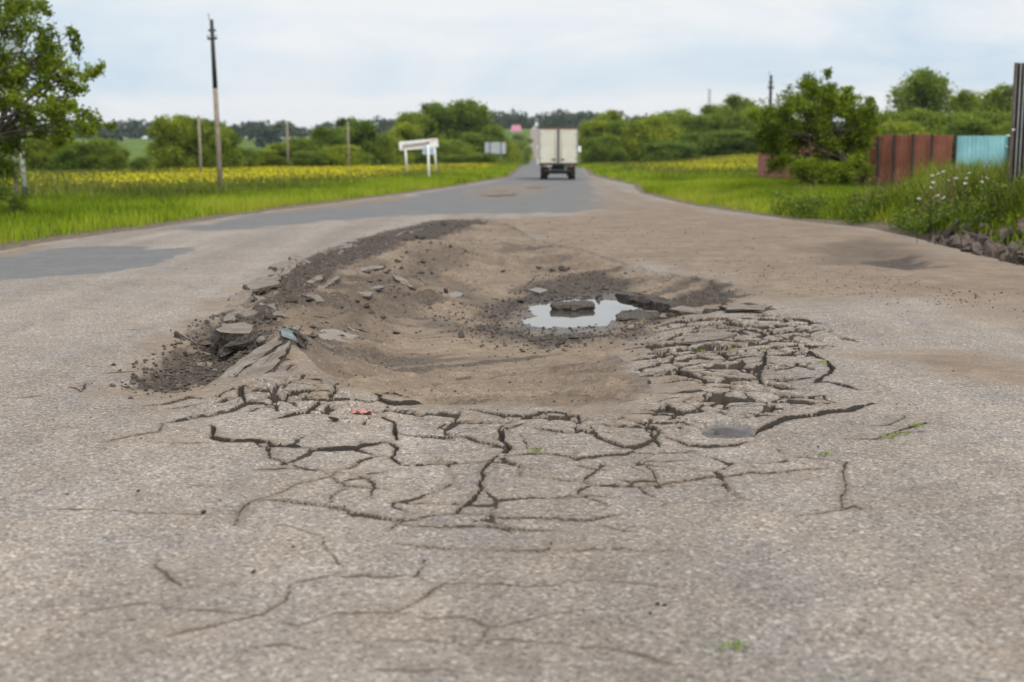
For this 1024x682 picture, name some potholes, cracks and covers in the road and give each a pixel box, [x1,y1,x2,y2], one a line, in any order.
crack [91,525,678,673]
pothole [132,216,746,408]
crack [107,308,928,553]
